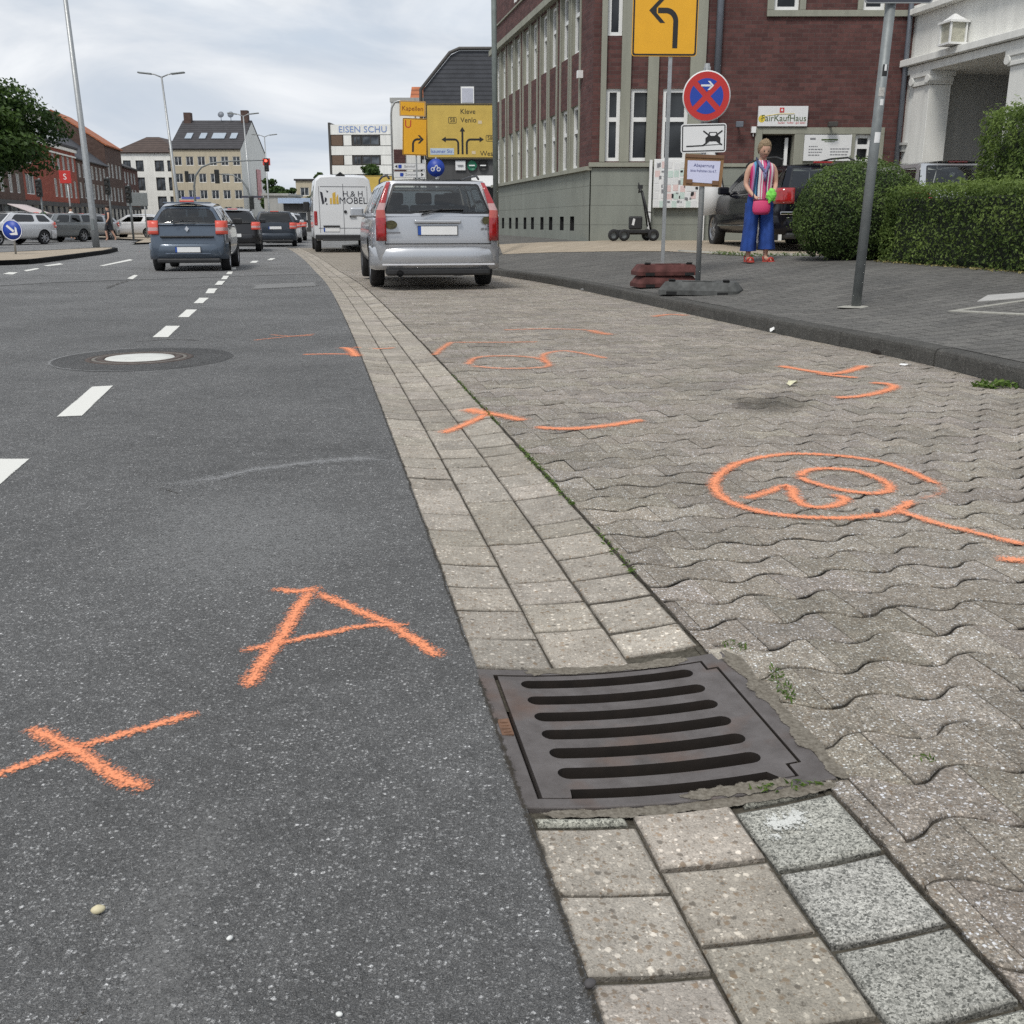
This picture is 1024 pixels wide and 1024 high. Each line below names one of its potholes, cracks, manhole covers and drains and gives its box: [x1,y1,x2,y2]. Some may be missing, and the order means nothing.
drain grate [477,652,836,814]
manhole cover [85,351,194,365]
